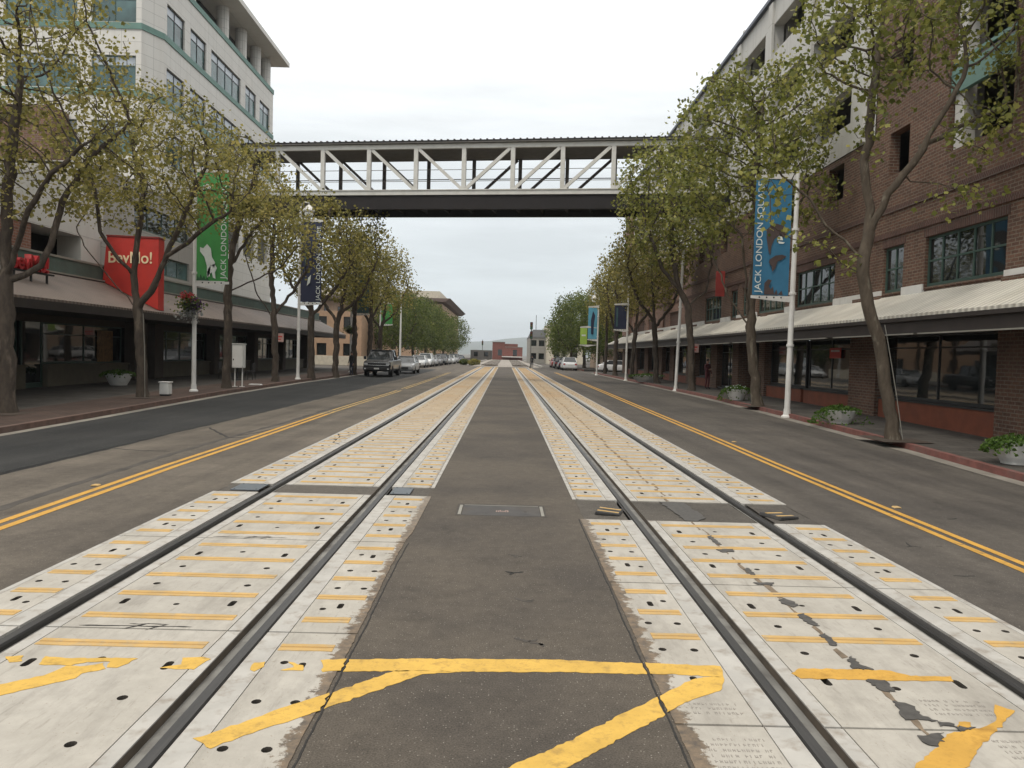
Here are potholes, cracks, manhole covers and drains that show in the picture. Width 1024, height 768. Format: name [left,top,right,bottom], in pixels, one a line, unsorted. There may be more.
crack [209,427,275,438]
crack [514,637,545,647]
utility cover [455,503,547,517]
